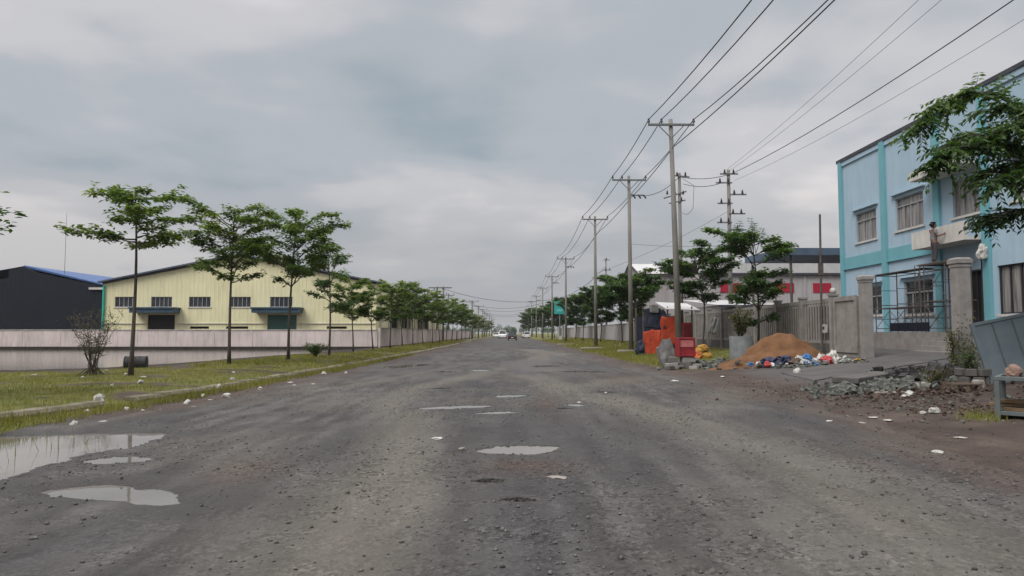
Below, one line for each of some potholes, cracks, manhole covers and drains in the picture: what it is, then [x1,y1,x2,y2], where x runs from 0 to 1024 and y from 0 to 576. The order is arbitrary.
pothole [456,476,517,485]
pothole [466,444,569,456]
pothole [69,454,166,466]
pothole [487,494,550,505]
